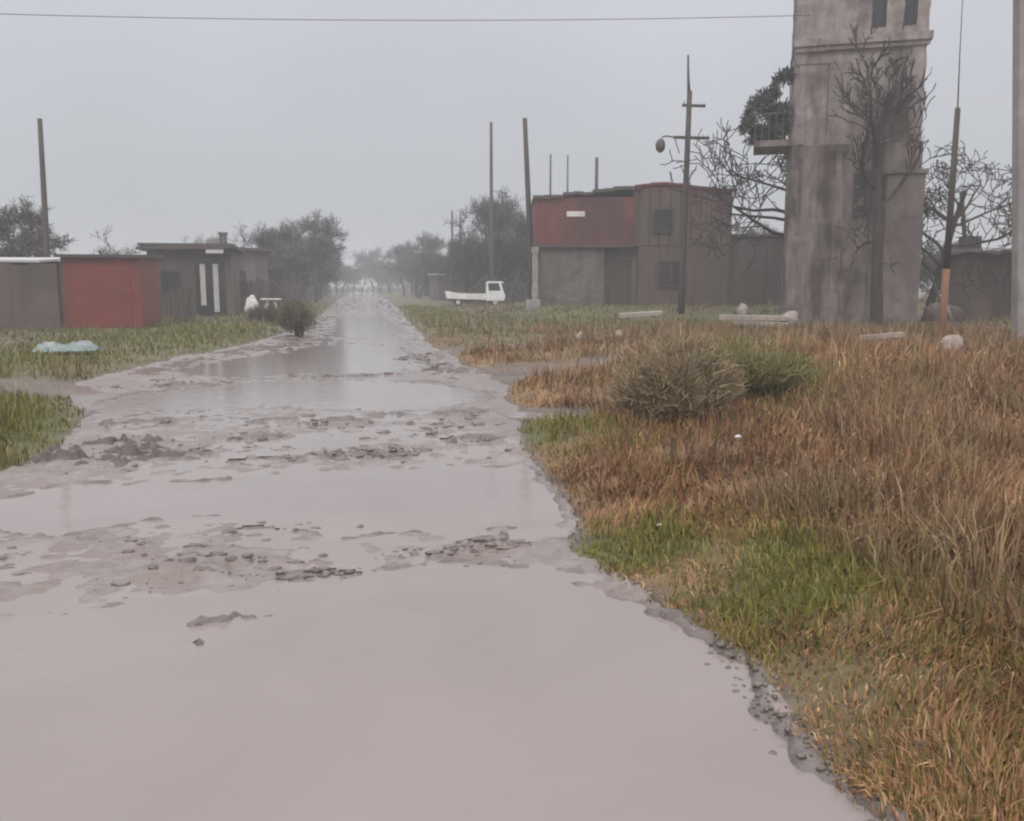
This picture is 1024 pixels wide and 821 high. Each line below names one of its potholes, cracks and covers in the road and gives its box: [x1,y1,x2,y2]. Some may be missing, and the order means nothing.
pothole [0,552,916,821]
pothole [145,448,217,461]
